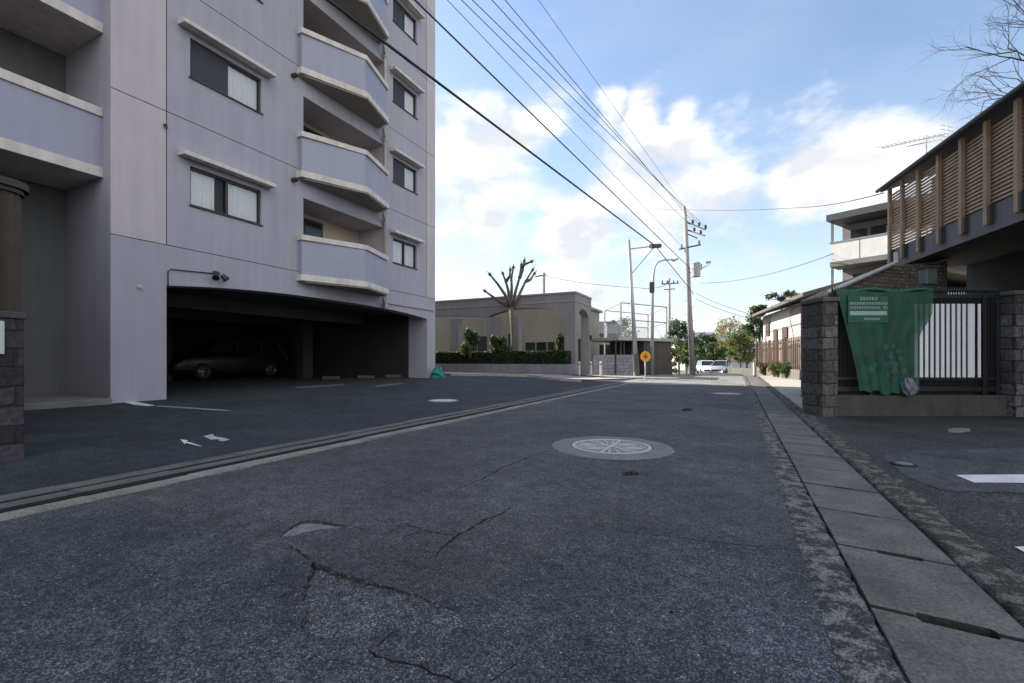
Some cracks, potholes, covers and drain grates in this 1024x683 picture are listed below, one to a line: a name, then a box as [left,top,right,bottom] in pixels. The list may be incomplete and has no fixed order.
crack [367,631,464,683]
crack [383,505,516,558]
pothole [280,520,349,537]
crack [448,450,548,494]
manhole cover [551,436,675,460]
